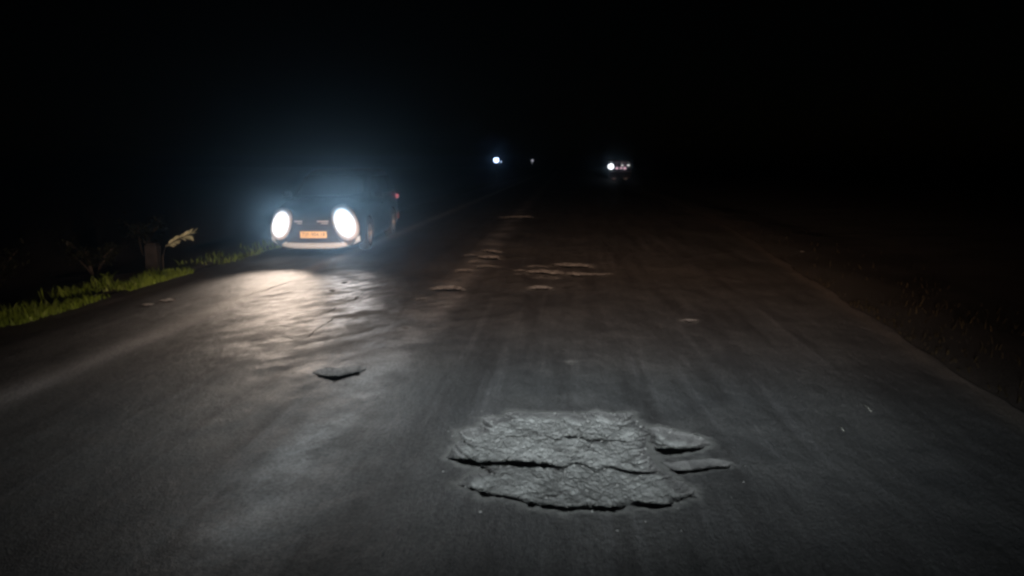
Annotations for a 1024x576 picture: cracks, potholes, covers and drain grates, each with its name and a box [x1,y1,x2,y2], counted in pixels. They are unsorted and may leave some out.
crack [273,293,371,339]
pothole [313,366,367,382]
